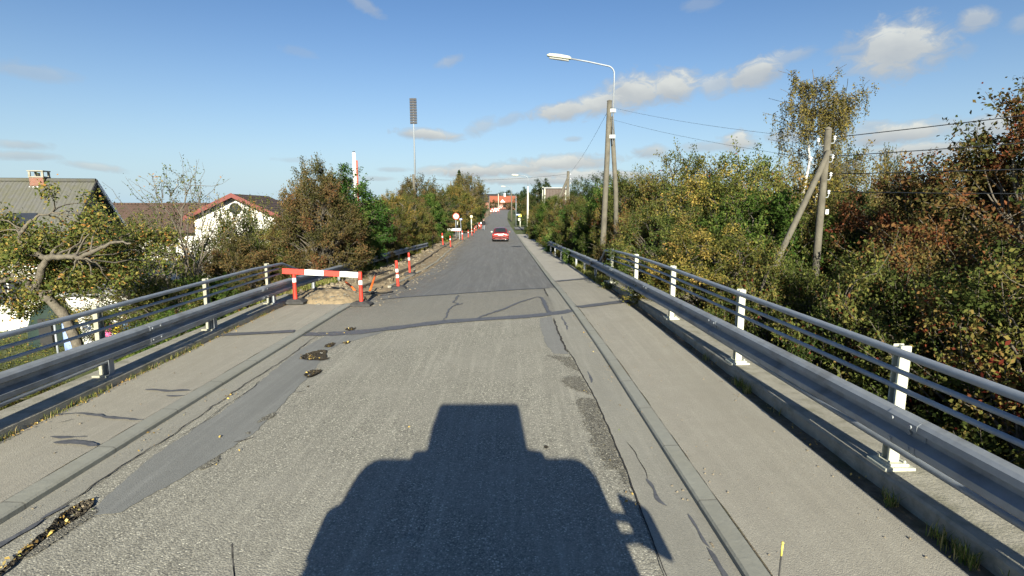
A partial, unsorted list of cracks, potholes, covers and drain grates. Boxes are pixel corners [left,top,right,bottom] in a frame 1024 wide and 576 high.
crack [381,287,554,320]
crack [553,319,667,576]
pothole [0,498,94,575]
pothole [301,350,329,361]
